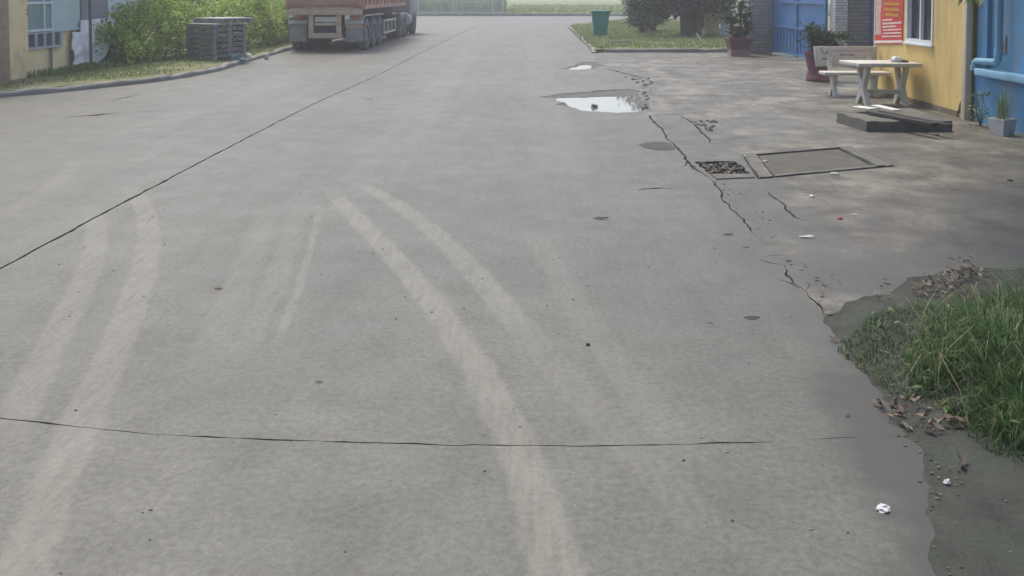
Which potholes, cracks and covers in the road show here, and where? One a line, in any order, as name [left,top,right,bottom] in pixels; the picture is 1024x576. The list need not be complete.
pothole [541,89,650,112]
crack [640,114,826,318]
drain grate [695,160,755,180]
manhole cover [742,146,895,179]
